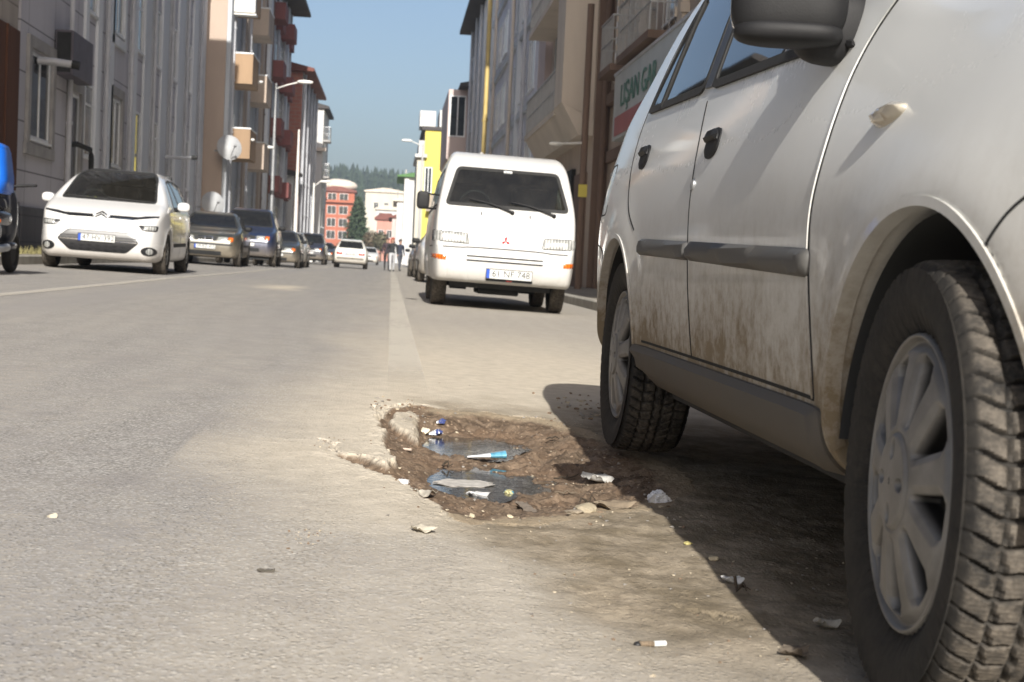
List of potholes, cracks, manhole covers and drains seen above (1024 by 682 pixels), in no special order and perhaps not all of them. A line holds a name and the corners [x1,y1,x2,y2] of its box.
pothole [335,403,697,527]
